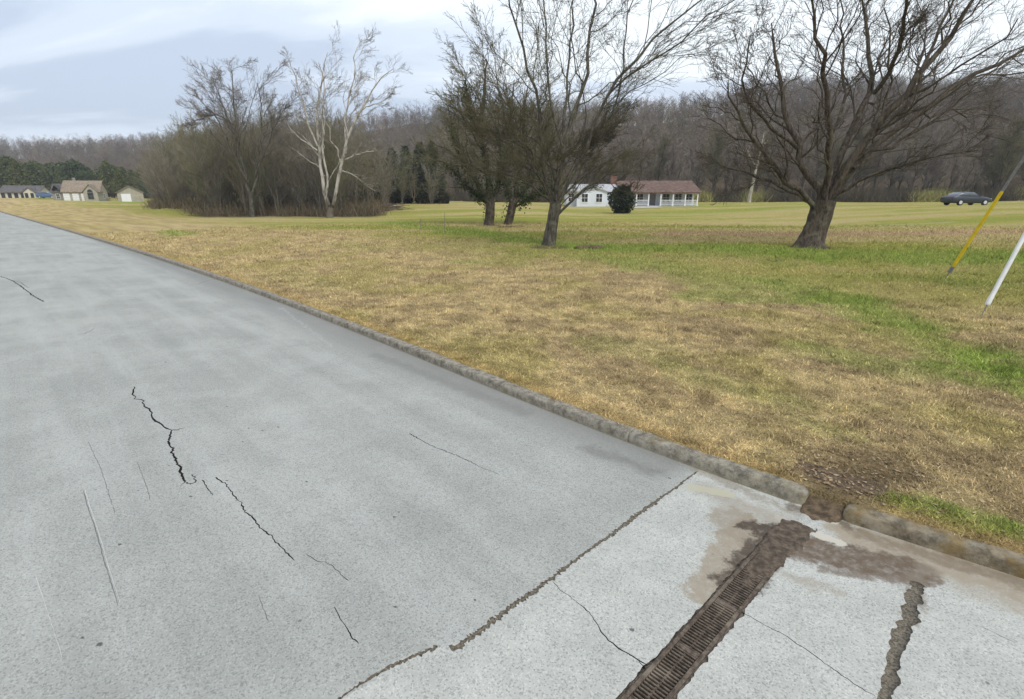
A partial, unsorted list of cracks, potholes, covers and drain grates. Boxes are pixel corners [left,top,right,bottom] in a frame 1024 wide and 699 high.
crack [742,580,925,699]
crack [132,387,348,580]
crack [334,433,697,699]
